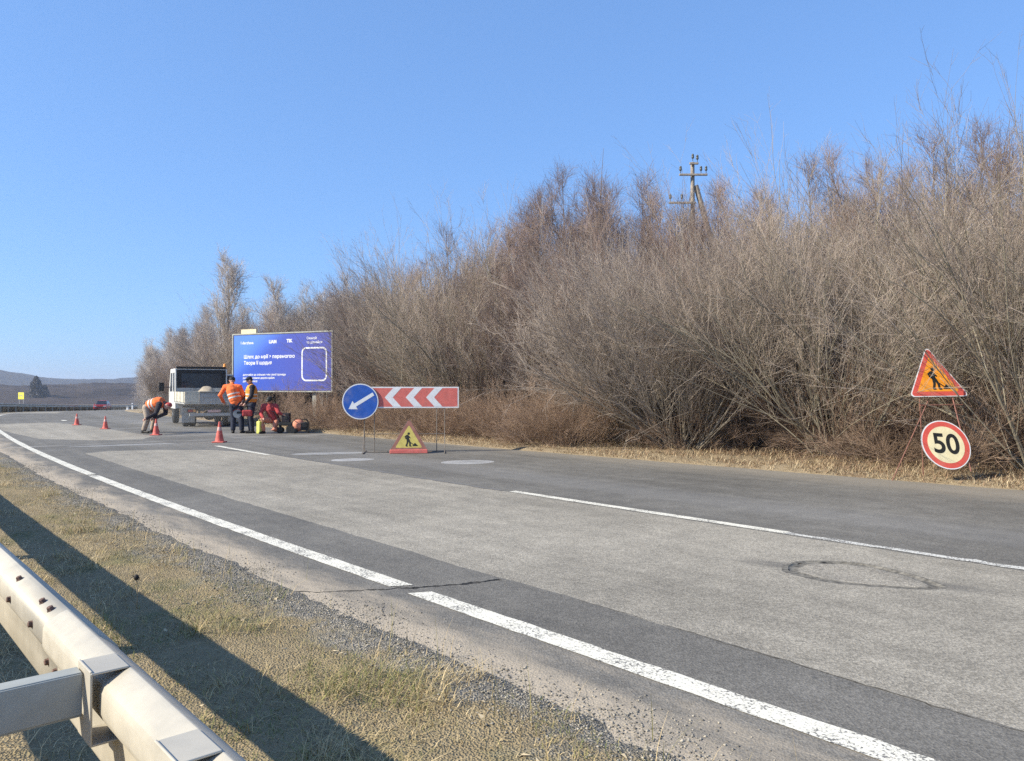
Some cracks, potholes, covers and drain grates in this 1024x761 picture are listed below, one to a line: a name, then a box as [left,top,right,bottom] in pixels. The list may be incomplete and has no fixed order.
crack [296,579,502,593]
